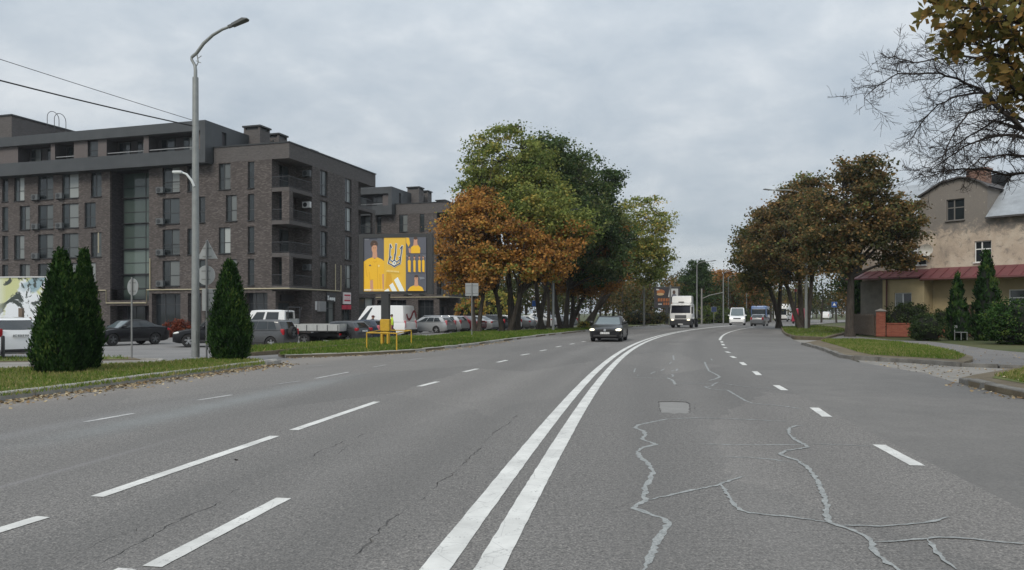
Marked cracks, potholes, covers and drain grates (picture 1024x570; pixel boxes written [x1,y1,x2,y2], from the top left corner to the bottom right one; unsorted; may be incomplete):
crack [354,415,517,556]
crack [90,491,233,567]
